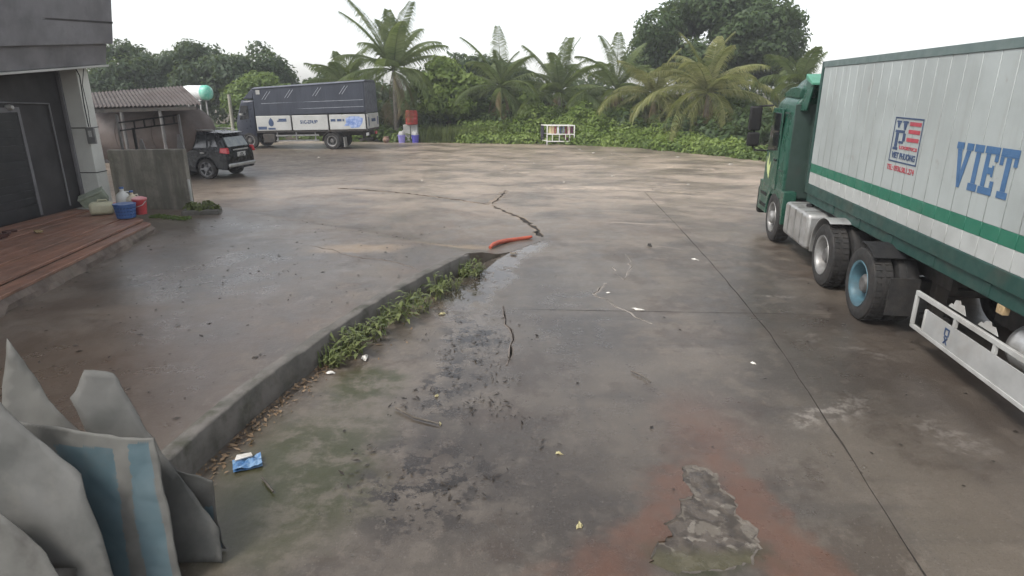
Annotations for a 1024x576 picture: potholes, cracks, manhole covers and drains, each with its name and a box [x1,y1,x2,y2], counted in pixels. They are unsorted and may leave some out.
pothole [651,465,763,575]
crack [338,188,544,237]
crack [502,306,516,365]
crack [592,254,652,324]
